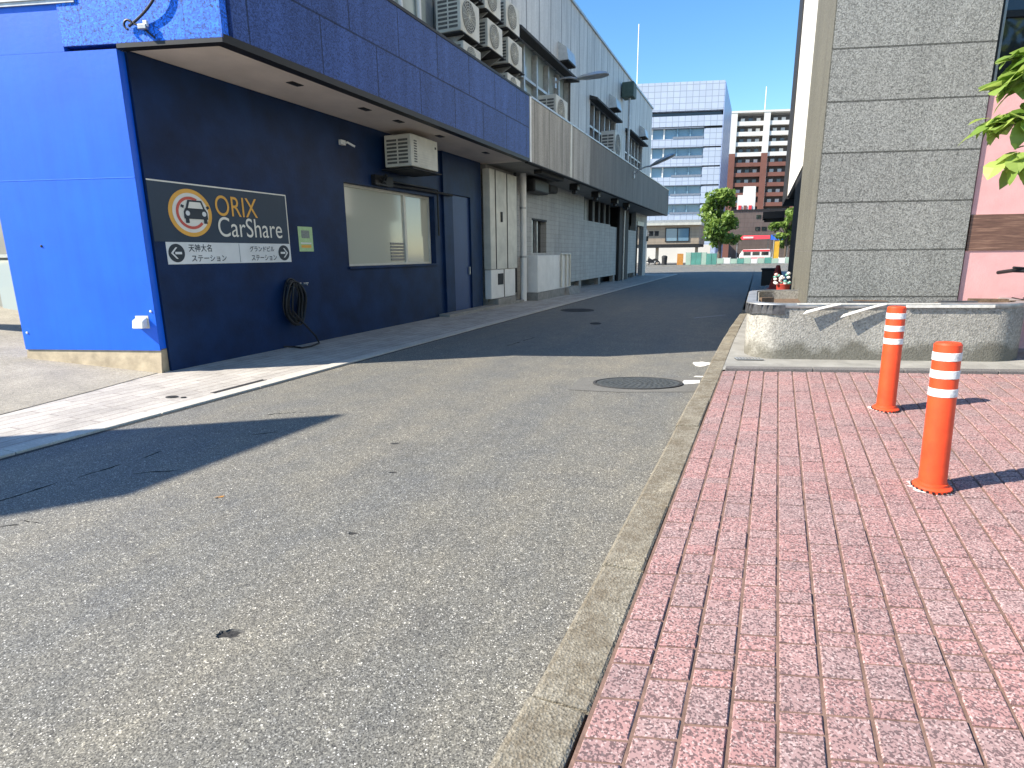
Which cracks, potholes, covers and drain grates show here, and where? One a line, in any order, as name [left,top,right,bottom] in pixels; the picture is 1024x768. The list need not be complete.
crack [0,451,175,501]
manhole cover [593,377,683,390]
pothole [216,629,246,638]
